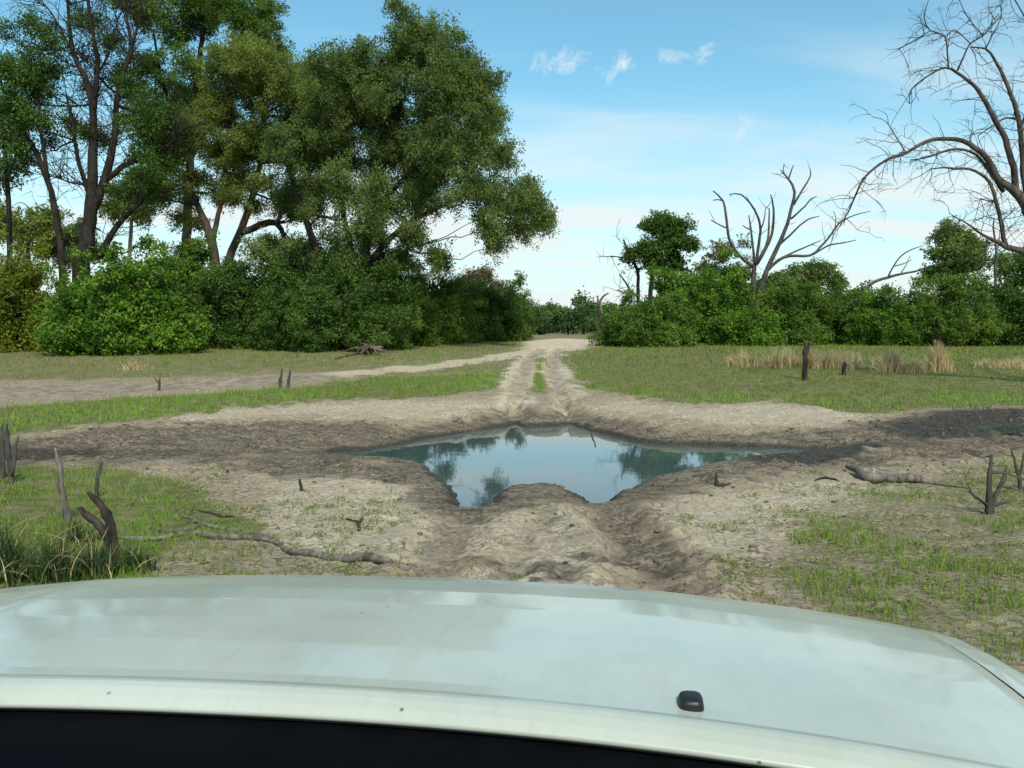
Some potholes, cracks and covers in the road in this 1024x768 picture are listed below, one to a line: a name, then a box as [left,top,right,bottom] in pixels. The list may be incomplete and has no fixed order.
pothole [310,413,843,510]
